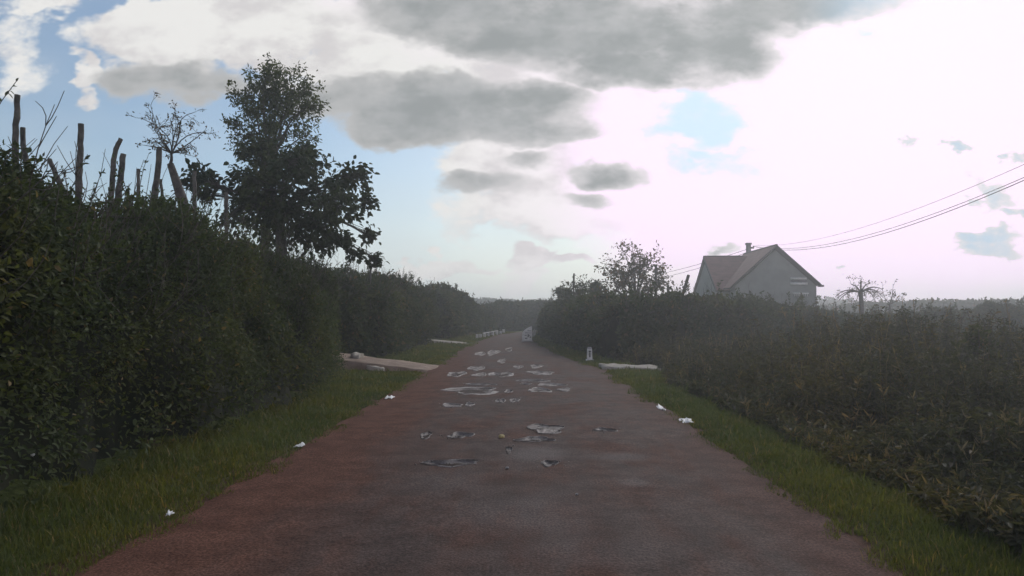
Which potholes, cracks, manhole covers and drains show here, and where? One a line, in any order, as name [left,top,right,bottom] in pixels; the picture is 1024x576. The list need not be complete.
pothole [442,387,498,395]
pothole [537,459,569,467]
pothole [439,431,475,439]
pothole [527,424,564,434]
pothole [414,459,494,468]
